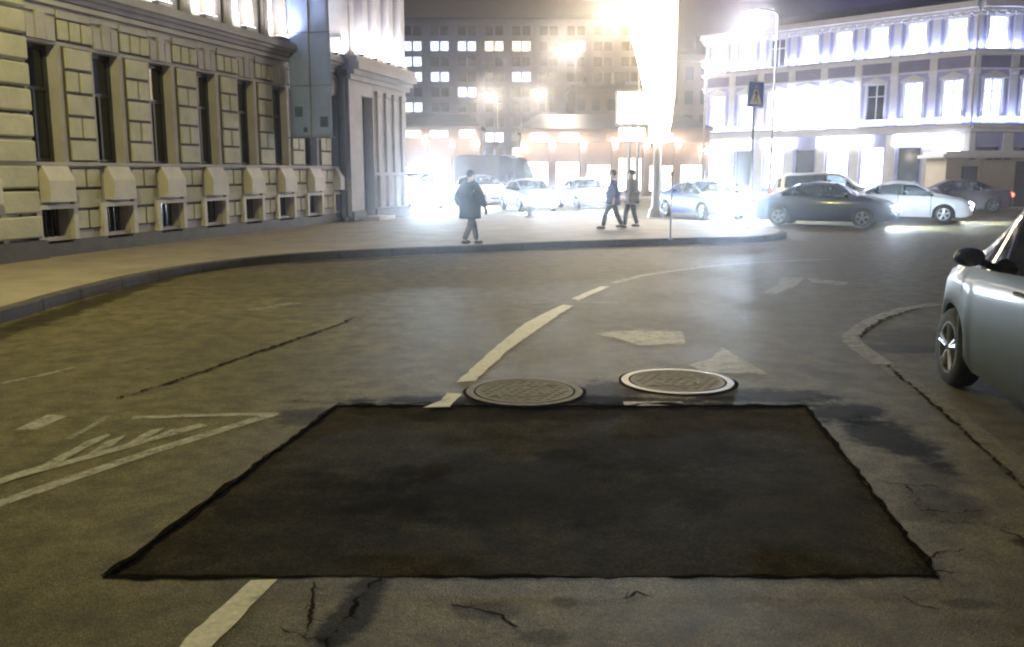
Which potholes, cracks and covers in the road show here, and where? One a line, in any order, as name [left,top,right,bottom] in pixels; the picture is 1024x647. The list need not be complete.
manhole cover [619,369,739,396]
crack [878,479,1024,539]
manhole cover [463,377,586,407]
crack [886,364,1024,488]
crack [279,578,382,647]
crack [614,590,652,602]
crack [451,604,518,627]
